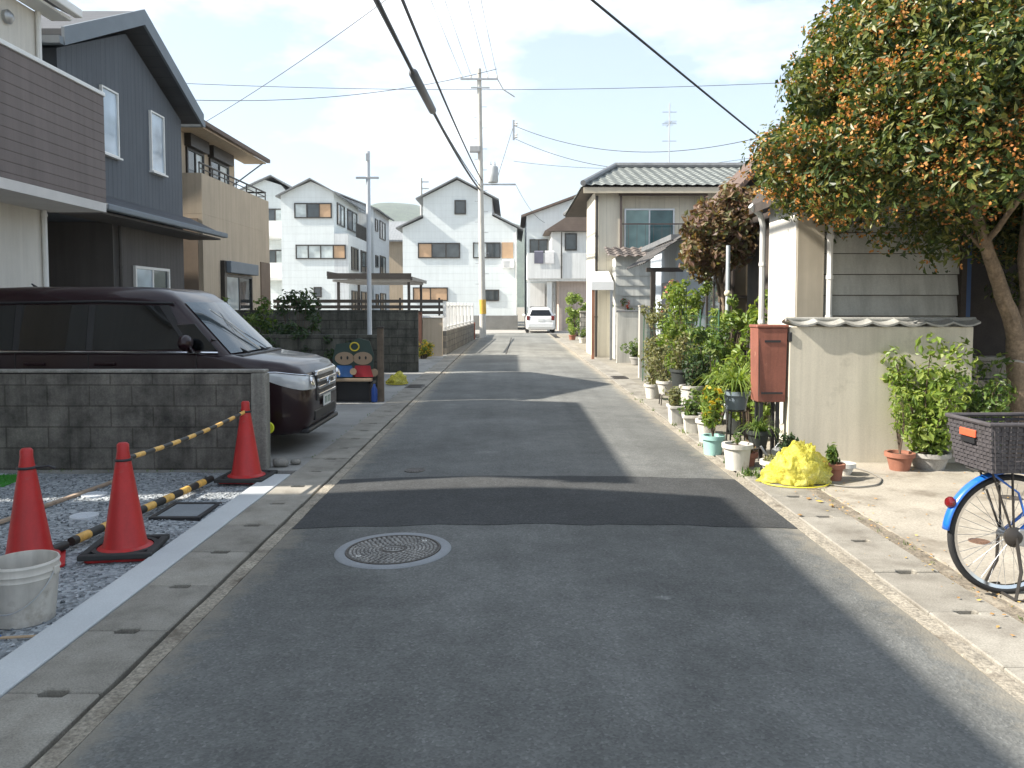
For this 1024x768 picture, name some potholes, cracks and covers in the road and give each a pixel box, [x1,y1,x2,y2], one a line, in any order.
manhole cover [334,532,451,570]
